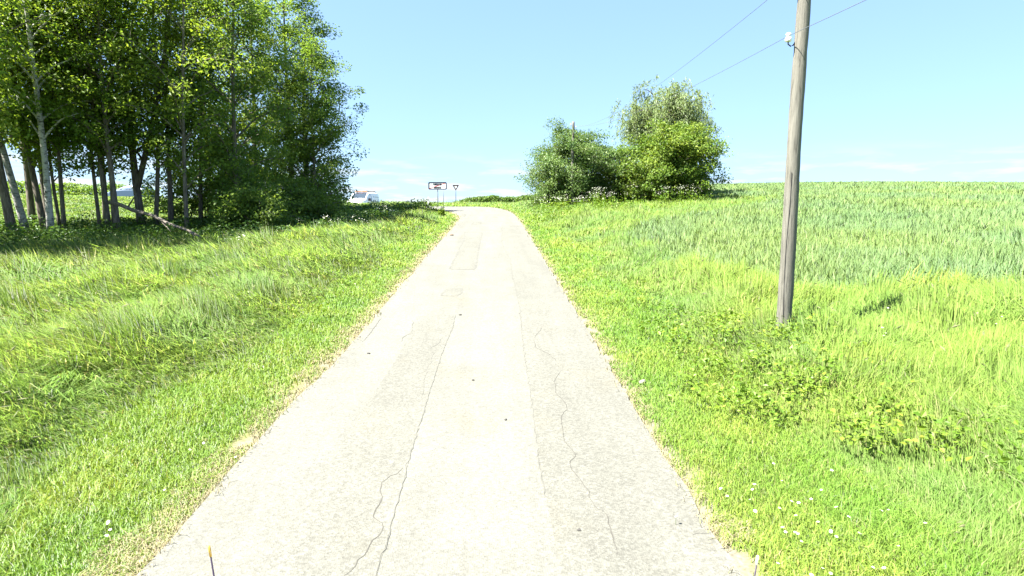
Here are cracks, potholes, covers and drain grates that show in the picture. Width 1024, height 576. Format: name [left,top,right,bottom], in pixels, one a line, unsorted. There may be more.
crack [345,474,395,575]
crack [533,331,617,550]
